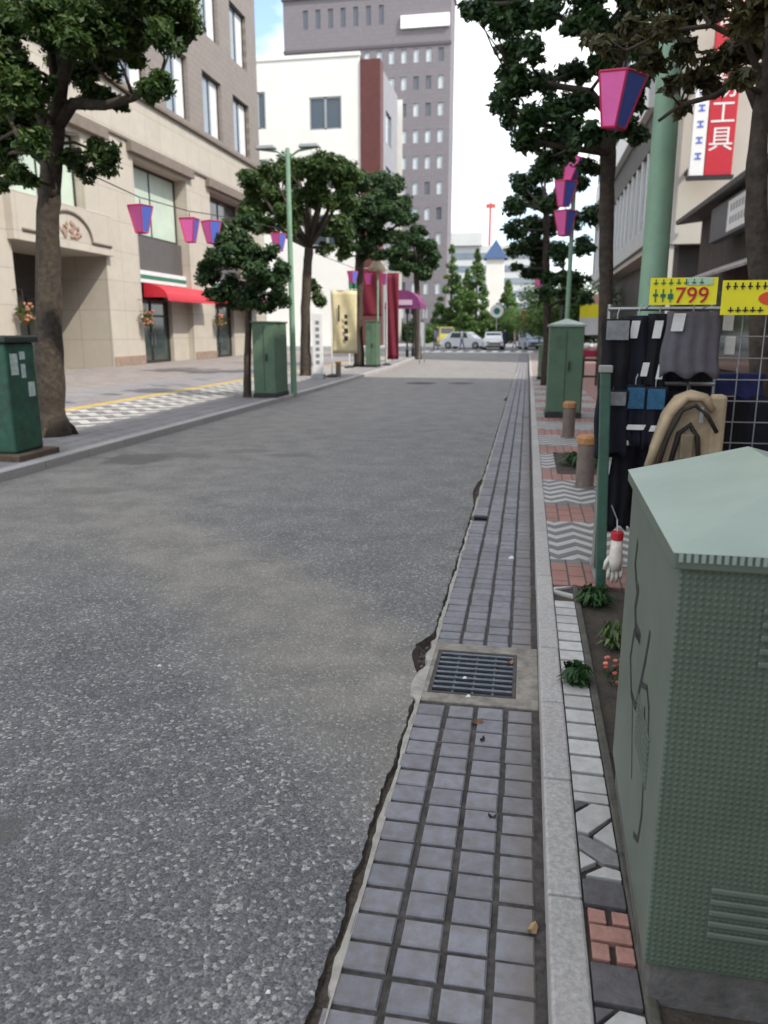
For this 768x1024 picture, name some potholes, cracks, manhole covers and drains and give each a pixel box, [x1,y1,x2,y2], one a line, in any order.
crack [304,766,396,1024]
drain grate [420,642,539,711]
